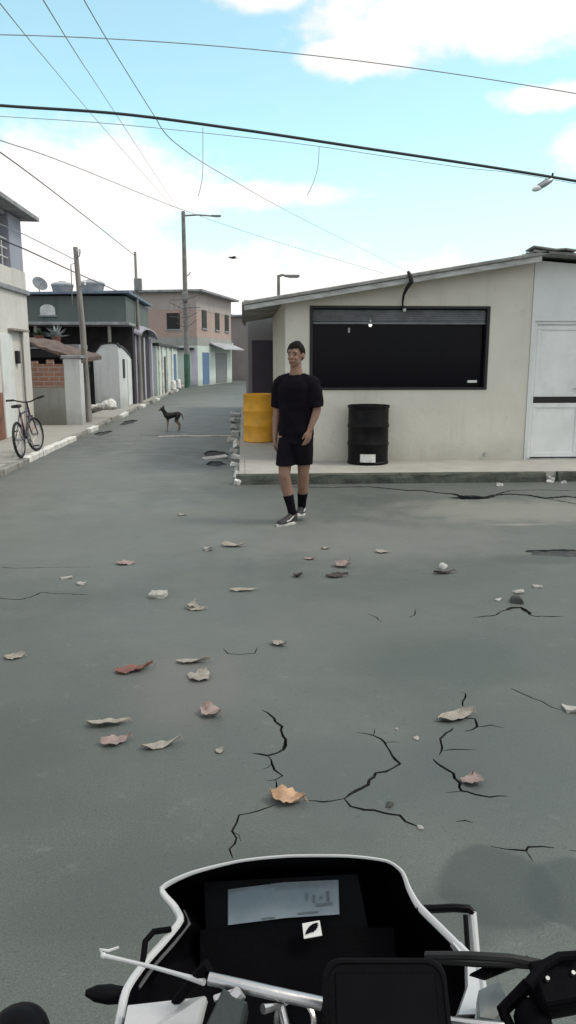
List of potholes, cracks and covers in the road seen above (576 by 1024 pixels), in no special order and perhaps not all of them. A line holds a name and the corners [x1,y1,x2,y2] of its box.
crack [253,710,287,788]
pothole [525,549,576,557]
crack [312,486,576,504]
crack [312,692,502,826]
crack [491,846,572,861]
crack [228,805,274,858]
crack [473,607,562,618]
